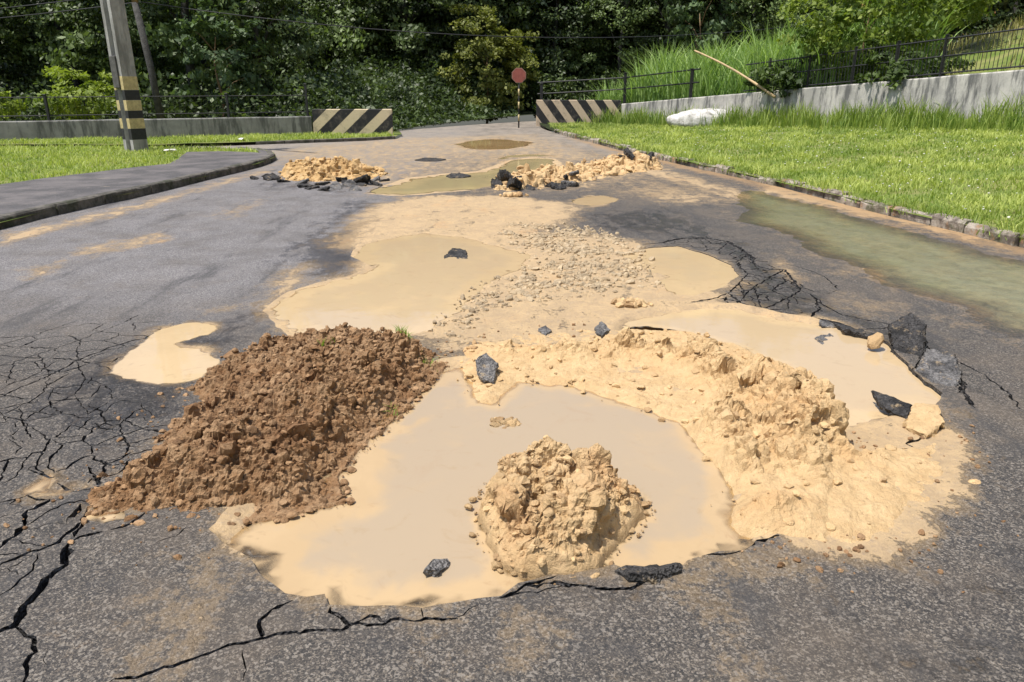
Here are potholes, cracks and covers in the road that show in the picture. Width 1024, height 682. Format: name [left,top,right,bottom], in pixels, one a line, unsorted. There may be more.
pothole [612,246,739,295]
crack [651,236,1021,449]
crack [498,576,640,598]
pothole [209,356,777,613]
pothole [606,302,942,433]
crack [0,315,170,682]
crack [109,600,477,682]
pothole [368,157,562,196]
pothole [263,232,532,336]
